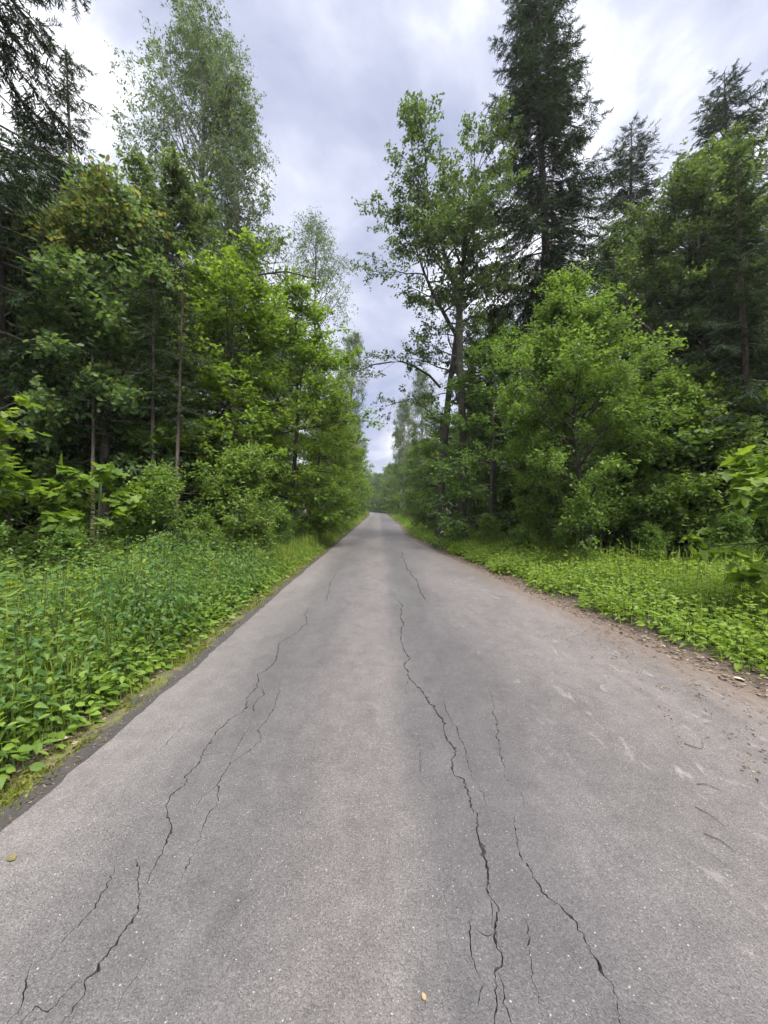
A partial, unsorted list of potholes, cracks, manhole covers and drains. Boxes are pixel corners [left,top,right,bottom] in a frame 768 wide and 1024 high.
crack [10,608,308,1024]
crack [399,552,513,1024]
crack [490,694,621,1024]
